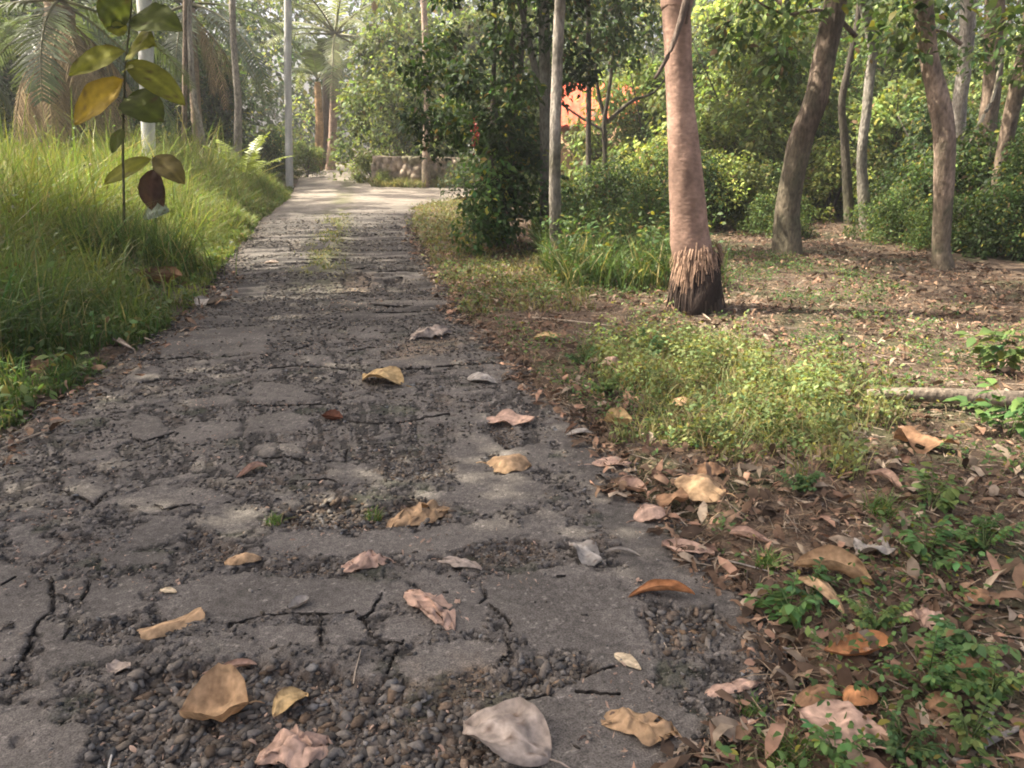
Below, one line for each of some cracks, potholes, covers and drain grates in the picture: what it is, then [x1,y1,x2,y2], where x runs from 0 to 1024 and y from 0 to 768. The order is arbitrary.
pothole [53,661,133,684]
crack [228,592,404,674]
crack [5,576,91,687]
crack [268,345,374,371]
pothole [70,652,508,768]
pothole [634,604,728,660]
crack [283,293,428,313]
crack [479,588,512,662]
pothole [442,538,561,571]
crack [250,402,450,425]
pothole [68,609,140,647]
